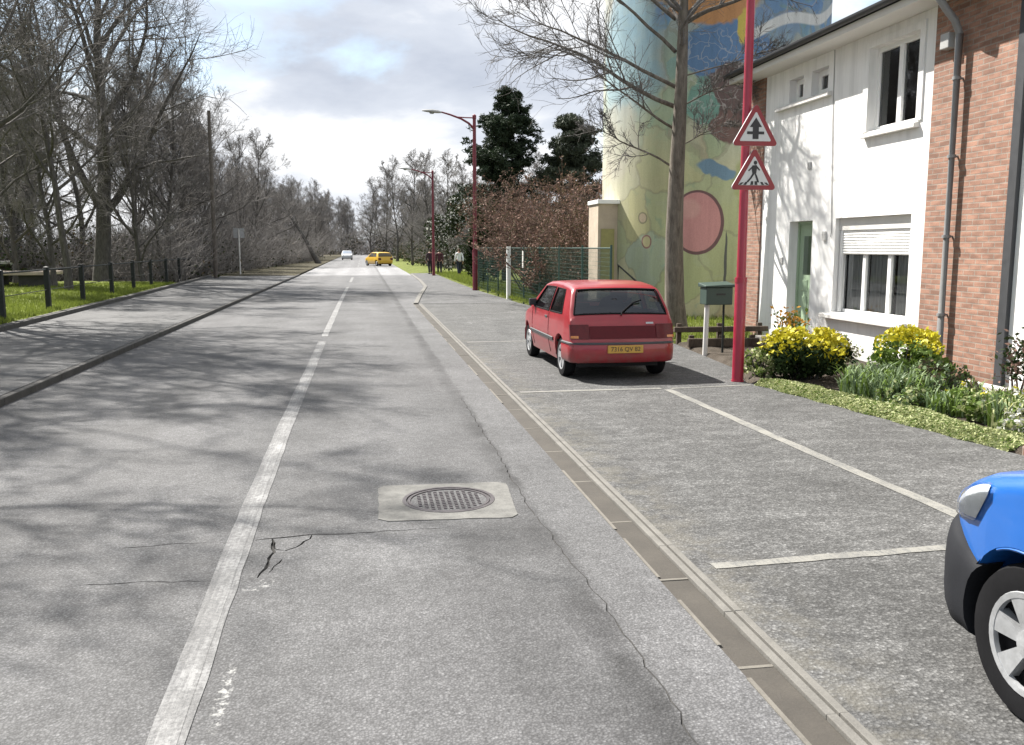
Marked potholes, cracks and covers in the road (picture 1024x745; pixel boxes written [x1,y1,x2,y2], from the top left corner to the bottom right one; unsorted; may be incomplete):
manhole cover [378,482,518,522]
crack [257,528,438,578]
